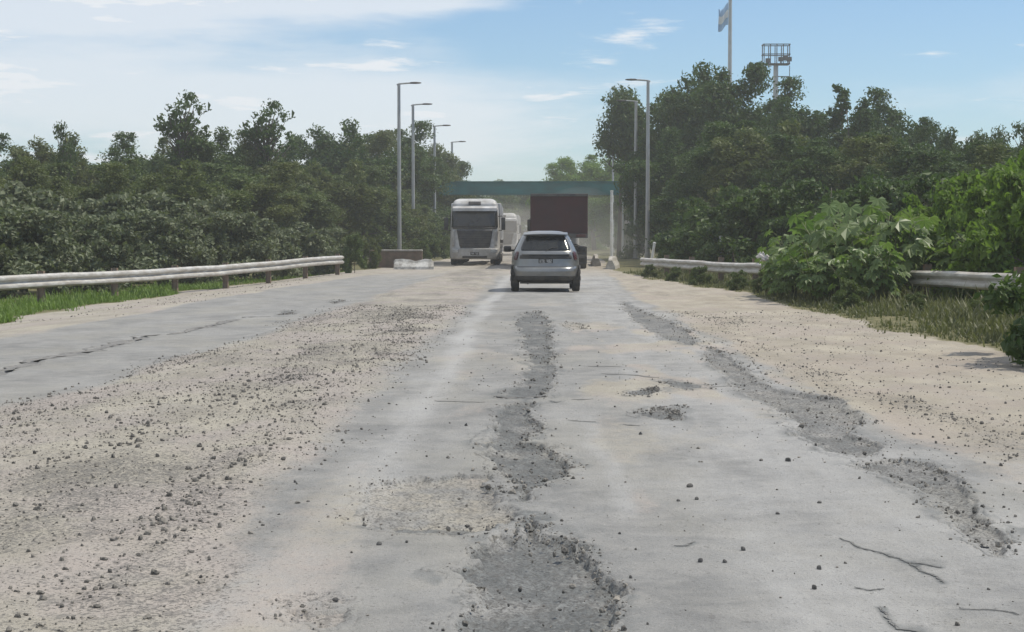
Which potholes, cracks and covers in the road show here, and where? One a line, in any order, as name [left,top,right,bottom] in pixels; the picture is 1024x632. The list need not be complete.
crack [856,587,922,632]
pothole [559,322,588,330]
pothole [693,344,886,467]
pothole [468,402,585,503]
pothole [420,513,633,632]
pothole [846,458,1024,558]
crack [0,316,271,375]
pothole [621,387,668,396]
crack [840,538,944,582]
pothole [626,405,687,421]
pothole [493,310,564,399]
